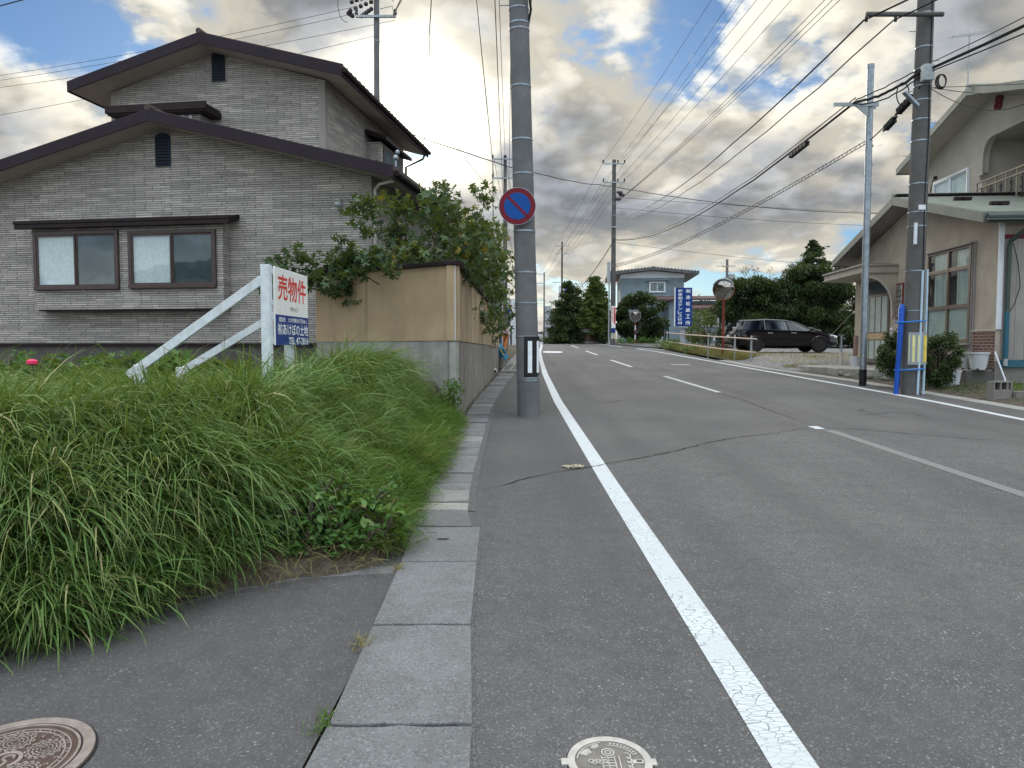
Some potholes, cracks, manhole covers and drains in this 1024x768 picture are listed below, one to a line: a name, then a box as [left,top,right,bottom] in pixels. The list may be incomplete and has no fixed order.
manhole cover [0,717,98,768]
crack [485,428,803,489]
manhole cover [561,736,658,768]
